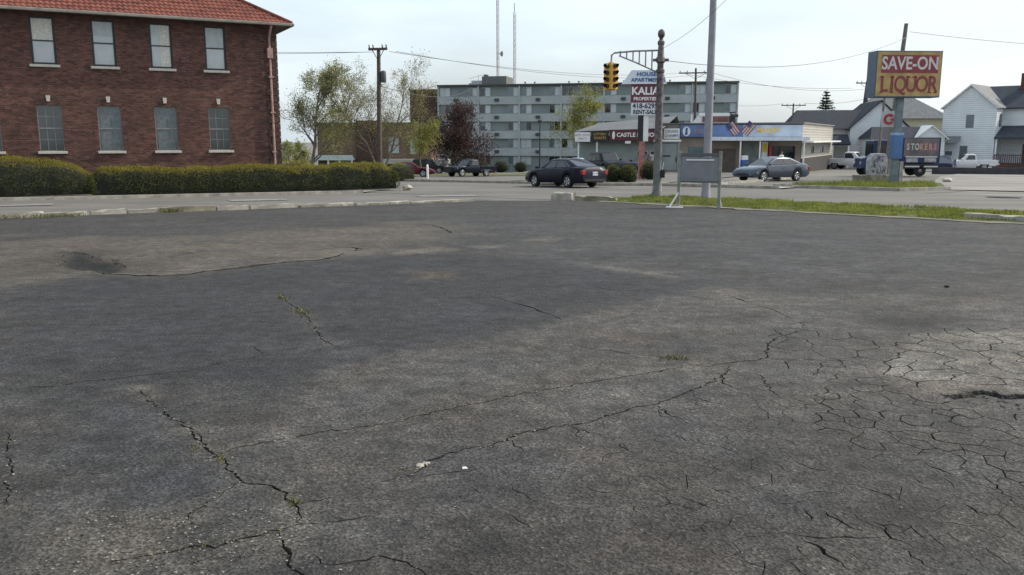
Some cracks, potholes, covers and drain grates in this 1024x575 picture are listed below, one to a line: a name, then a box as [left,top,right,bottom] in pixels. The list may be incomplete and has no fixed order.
pothole [939,390,1024,409]
pothole [55,252,127,274]
crack [381,296,1024,575]
crack [108,365,689,575]
crack [277,295,339,347]
crack [3,433,14,505]
